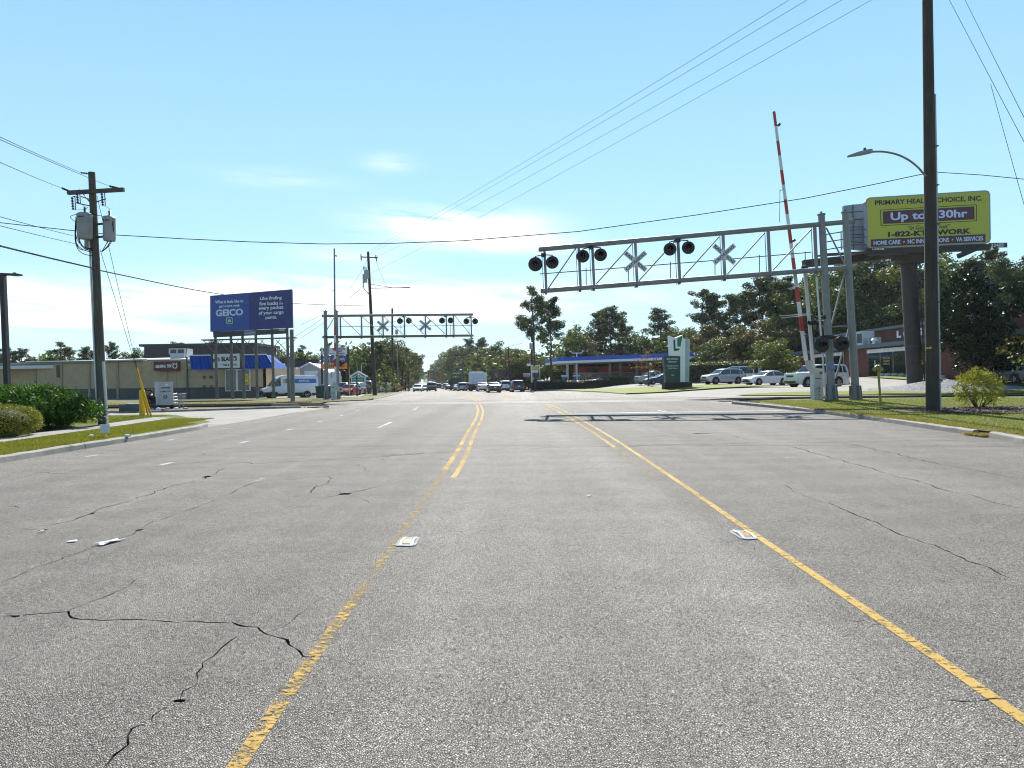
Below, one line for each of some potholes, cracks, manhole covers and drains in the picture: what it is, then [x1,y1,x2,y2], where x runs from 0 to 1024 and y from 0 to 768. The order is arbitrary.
crack [8,580,320,768]
crack [32,436,1006,531]
crack [787,486,1012,579]
